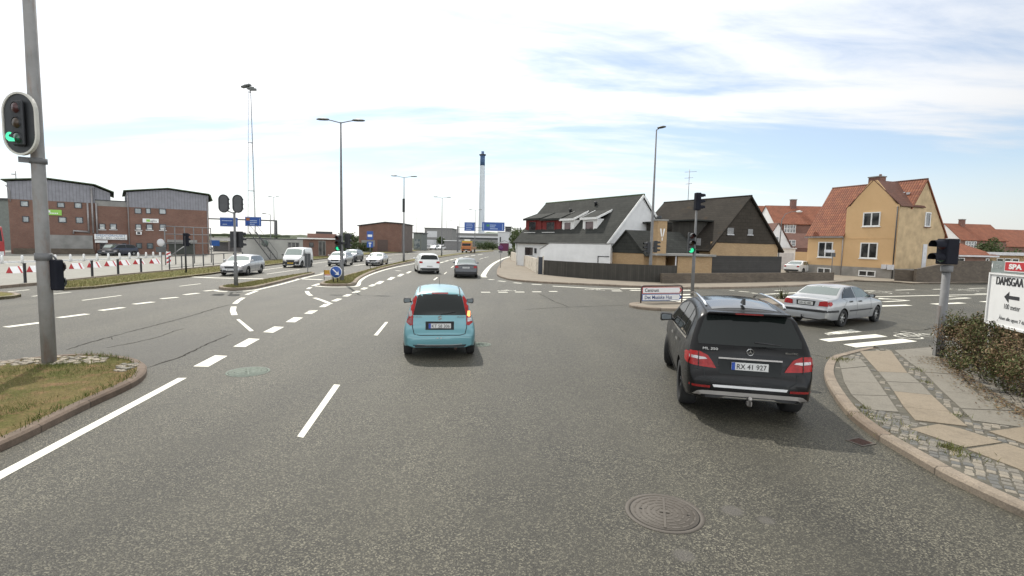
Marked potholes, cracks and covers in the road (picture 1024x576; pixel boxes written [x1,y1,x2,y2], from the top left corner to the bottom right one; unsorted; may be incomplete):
drain grate [846,437,877,447]
manhole cover [625,494,705,534]
crack [147,334,231,368]
crack [67,305,227,350]
manhole cover [225,367,270,377]
